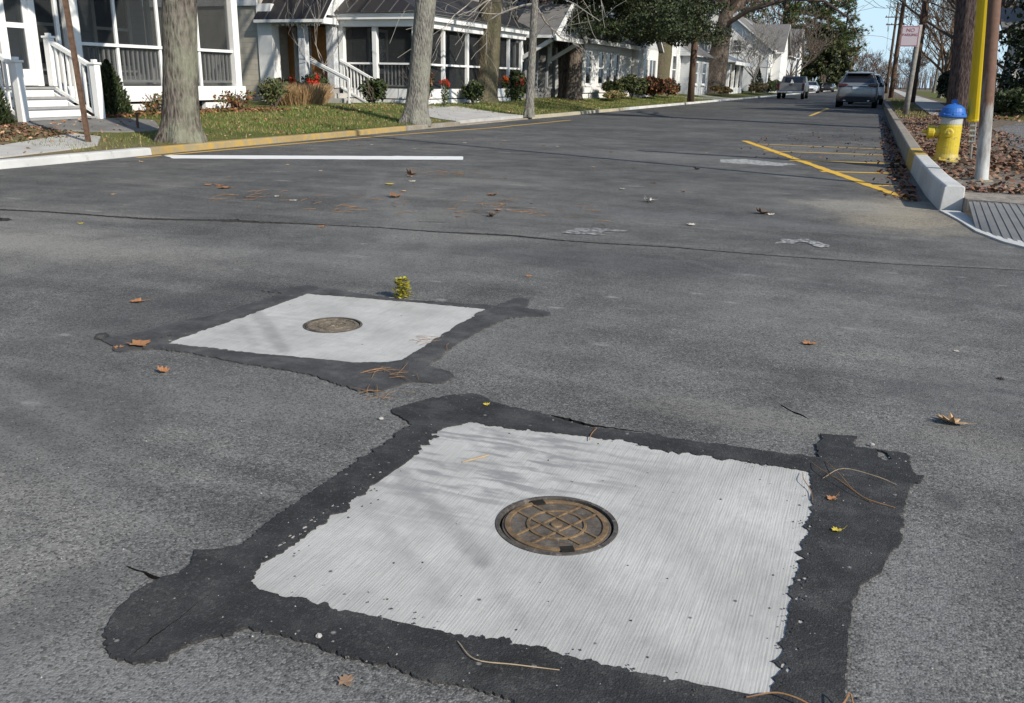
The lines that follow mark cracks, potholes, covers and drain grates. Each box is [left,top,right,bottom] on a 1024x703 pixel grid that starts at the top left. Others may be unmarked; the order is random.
crack [126,566,160,580]
manhole cover [303,317,362,333]
manhole cover [495,496,618,556]
